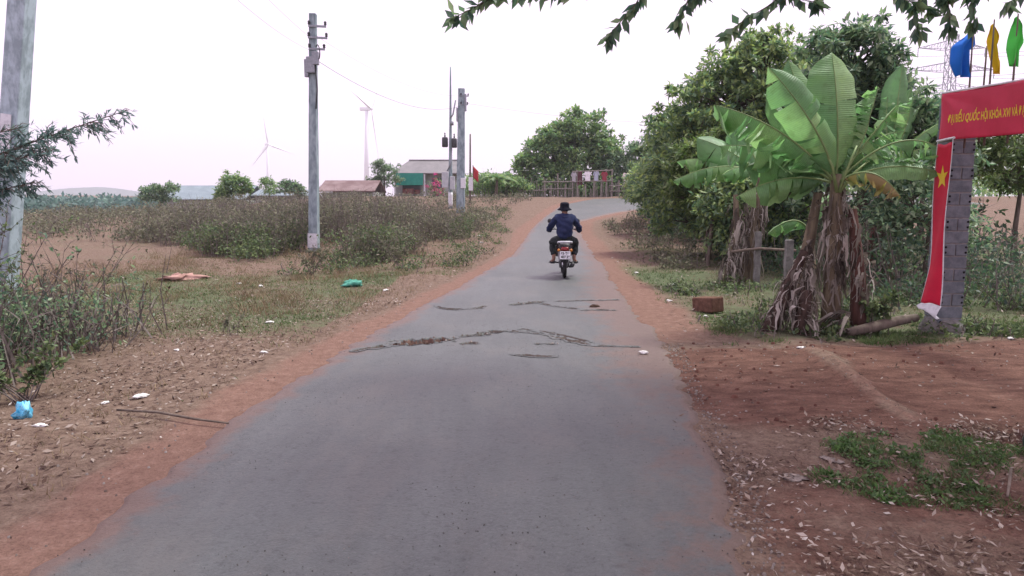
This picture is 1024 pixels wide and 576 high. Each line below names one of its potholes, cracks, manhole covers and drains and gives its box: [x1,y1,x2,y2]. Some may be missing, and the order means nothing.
crack [539,299,620,311]
pothole [381,336,458,347]
